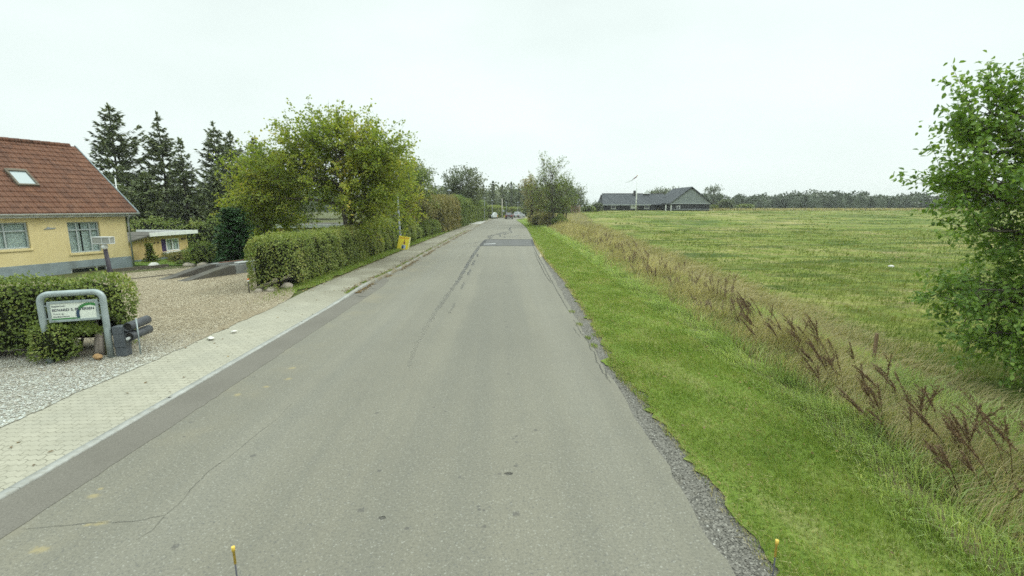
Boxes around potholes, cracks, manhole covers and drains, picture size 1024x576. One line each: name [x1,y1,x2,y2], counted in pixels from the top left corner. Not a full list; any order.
crack [27,420,275,540]
crack [533,247,611,383]
